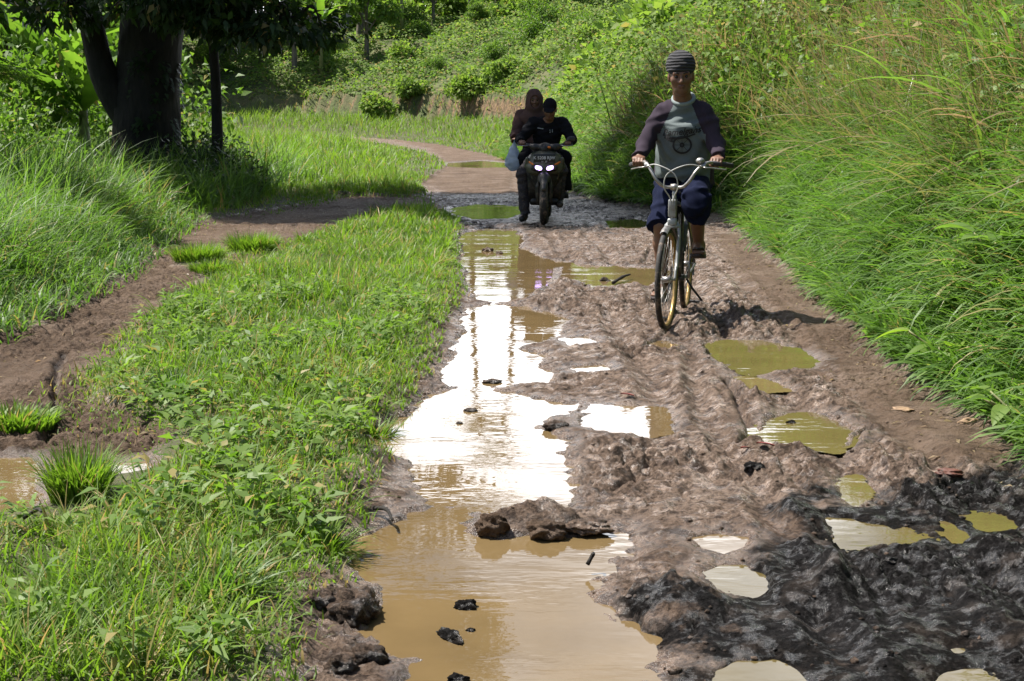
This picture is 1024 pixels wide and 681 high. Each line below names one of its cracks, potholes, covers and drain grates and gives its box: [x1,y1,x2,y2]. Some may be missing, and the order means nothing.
pothole [931,513,976,545]
pothole [338,498,684,681]
pothole [455,225,575,304]
pothole [573,402,678,439]
pothole [817,508,945,553]
pothole [728,374,792,395]
pothole [358,386,595,514]
pothole [696,335,827,377]
pothole [947,508,1024,534]
pothole [566,362,615,373]
pothole [448,203,520,219]
pothole [741,410,862,458]
